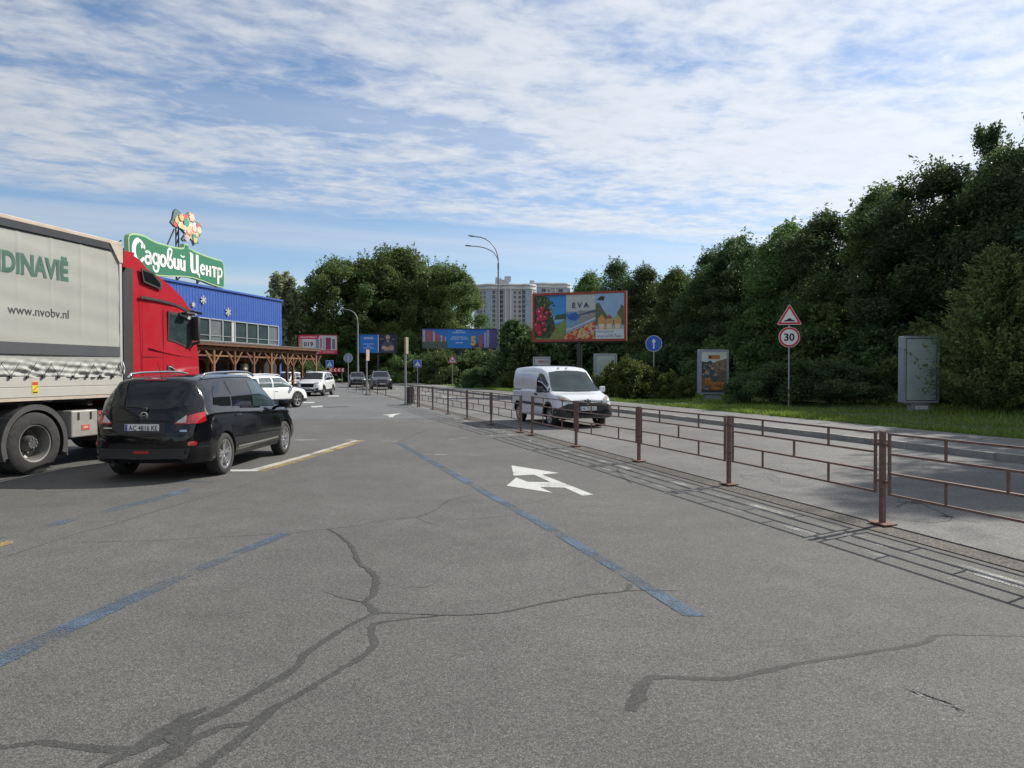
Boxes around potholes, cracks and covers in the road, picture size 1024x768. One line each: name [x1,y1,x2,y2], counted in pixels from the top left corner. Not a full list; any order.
crack [895,489,974,522]
